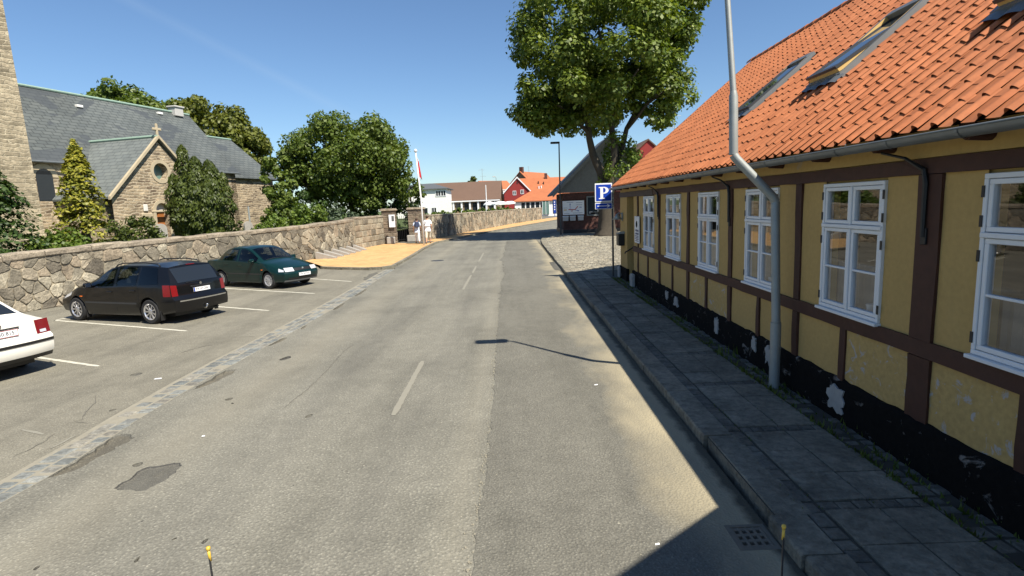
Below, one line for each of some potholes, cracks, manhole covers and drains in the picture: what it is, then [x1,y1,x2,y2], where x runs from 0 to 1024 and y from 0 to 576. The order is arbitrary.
drain grate [724,524,782,551]
